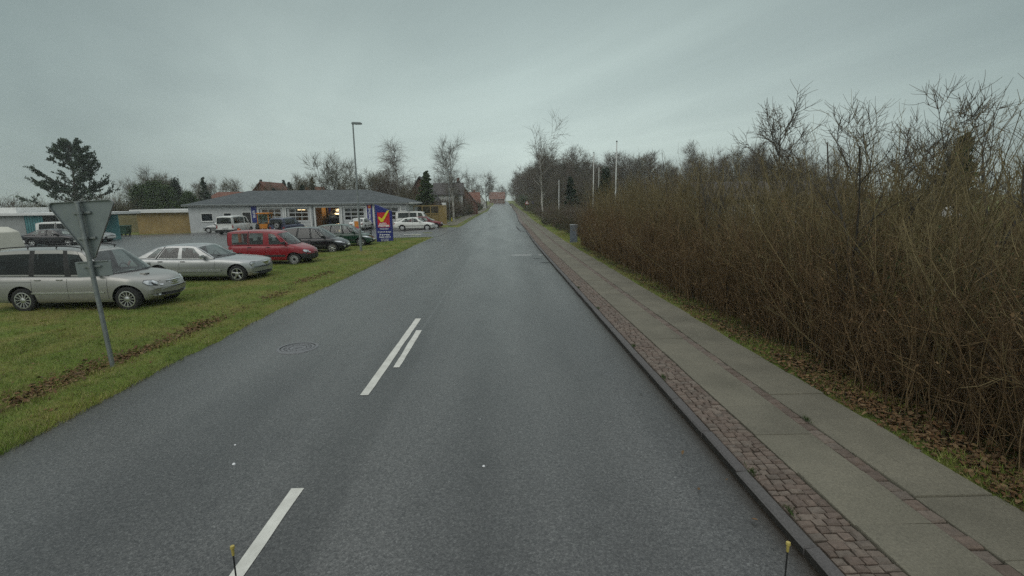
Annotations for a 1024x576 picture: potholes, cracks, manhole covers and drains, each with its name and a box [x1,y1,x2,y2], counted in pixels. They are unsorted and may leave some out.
manhole cover [276,342,319,354]
